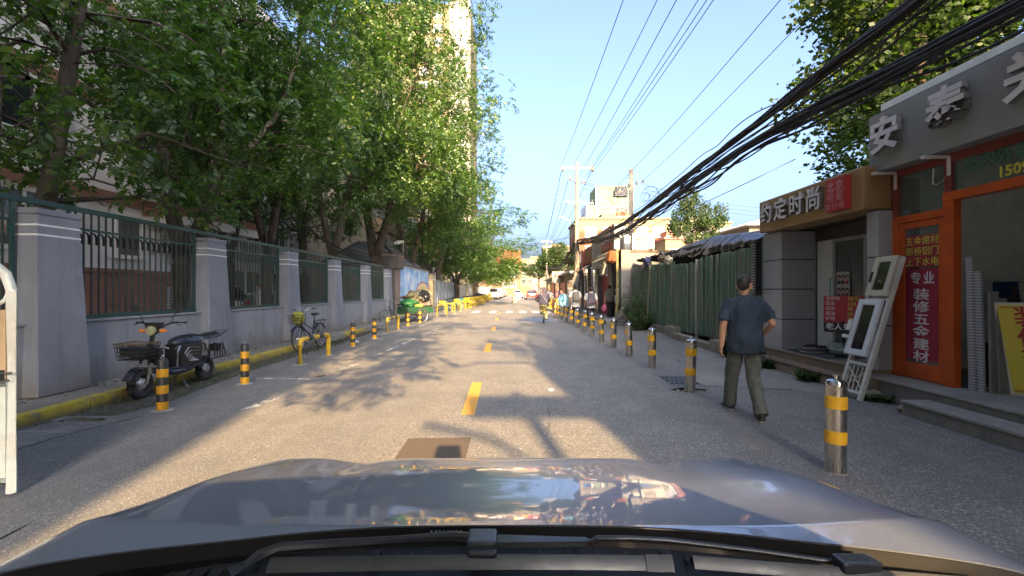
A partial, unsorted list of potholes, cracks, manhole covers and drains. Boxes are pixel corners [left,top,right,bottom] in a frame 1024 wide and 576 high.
drain grate [658,376,701,385]
